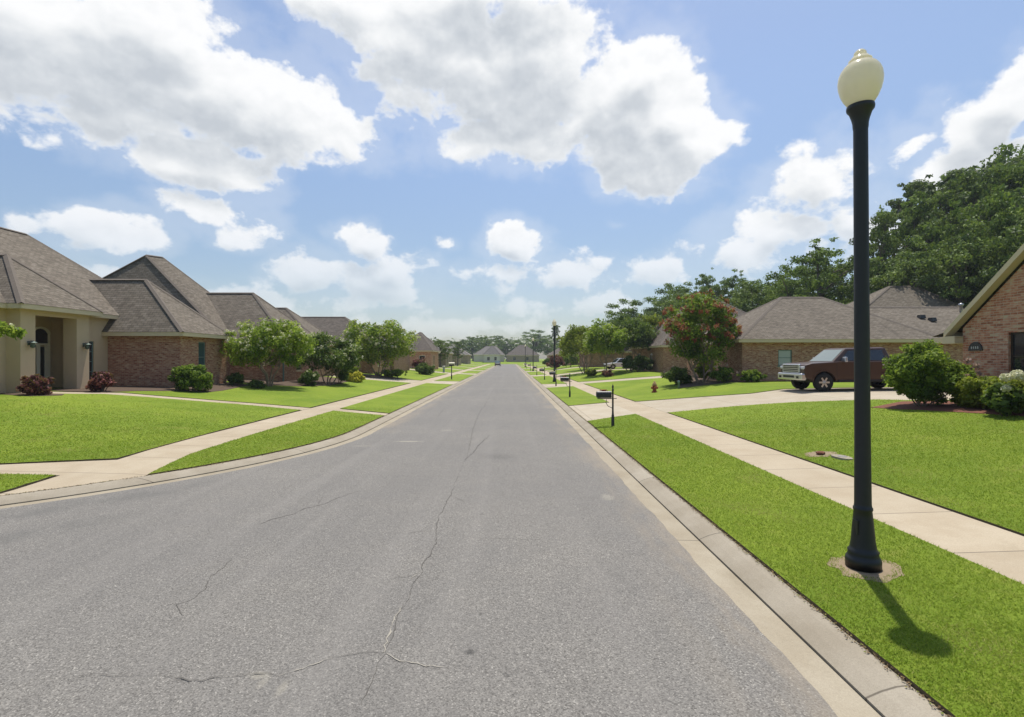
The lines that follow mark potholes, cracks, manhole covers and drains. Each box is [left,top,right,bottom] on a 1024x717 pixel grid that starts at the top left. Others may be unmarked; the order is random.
crack [60,387,495,706]
